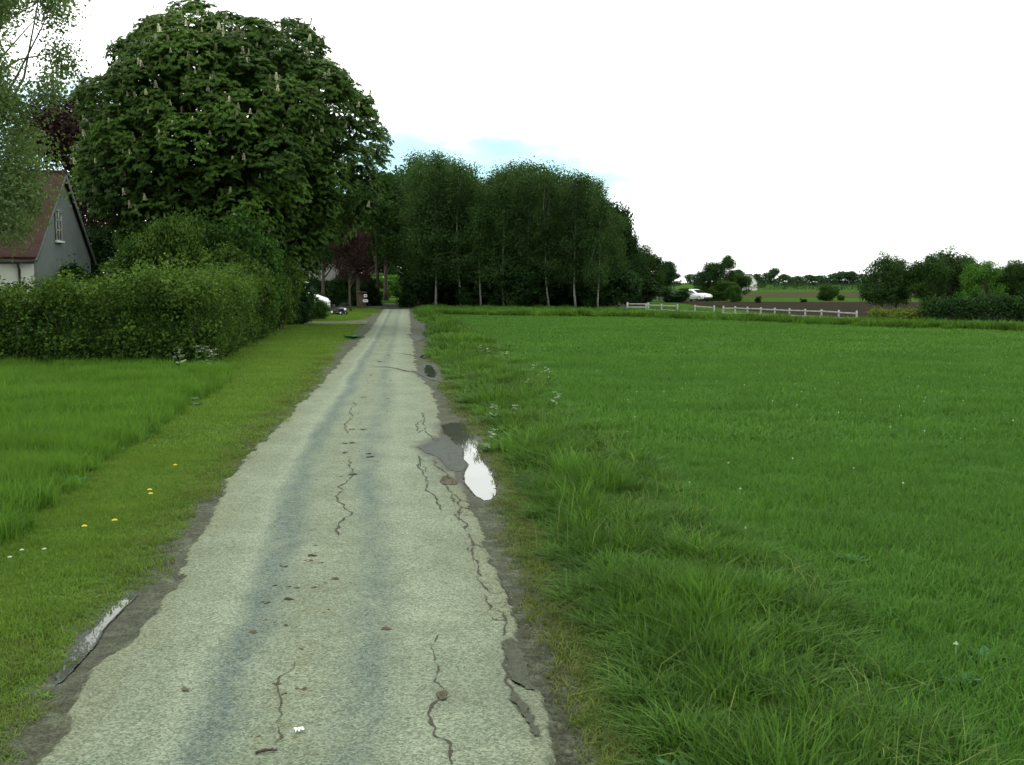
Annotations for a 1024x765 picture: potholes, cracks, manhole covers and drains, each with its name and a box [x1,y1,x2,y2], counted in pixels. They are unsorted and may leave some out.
pothole [54,592,138,686]
crack [265,661,295,748]
crack [427,634,453,765]
pothole [418,437,467,472]
pothole [440,422,498,501]
pothole [511,692,541,736]
crack [335,458,378,535]
crack [415,413,532,727]
pothole [502,637,538,690]
